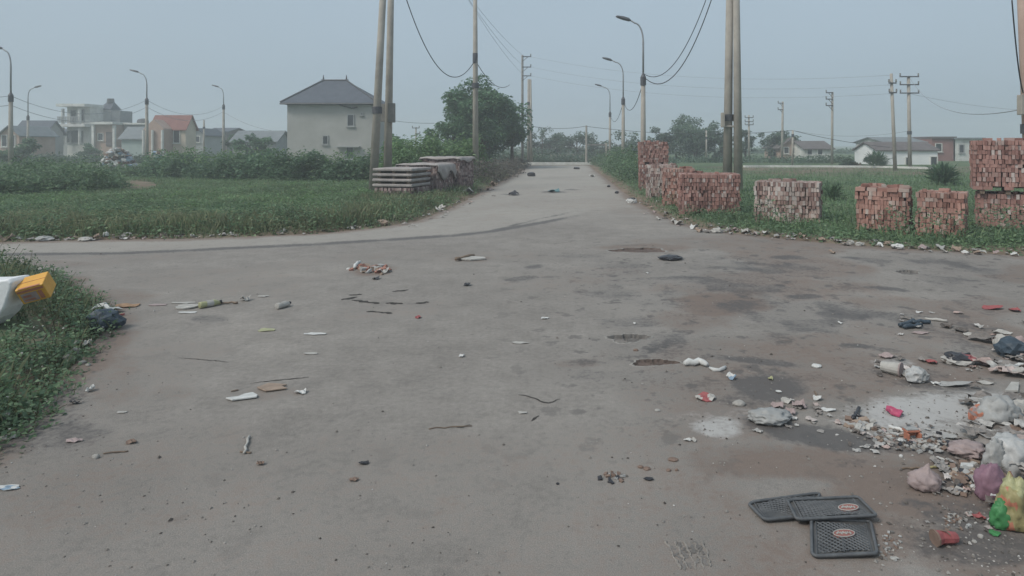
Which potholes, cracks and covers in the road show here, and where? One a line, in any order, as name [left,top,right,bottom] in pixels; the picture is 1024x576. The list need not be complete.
pothole [603,333,654,344]
pothole [629,359,683,367]
